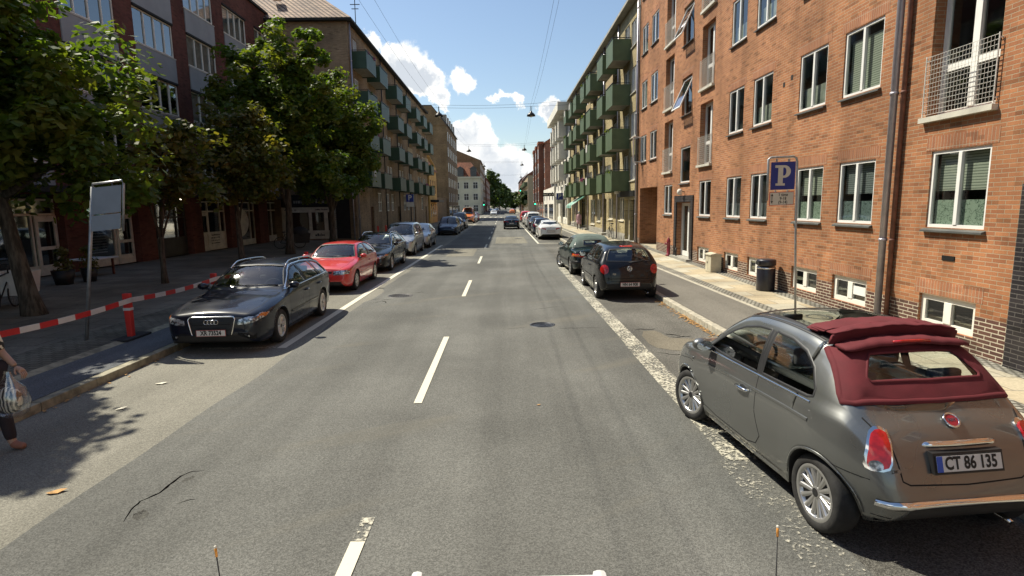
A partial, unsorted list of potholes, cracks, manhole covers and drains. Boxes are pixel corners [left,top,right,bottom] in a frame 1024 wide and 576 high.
crack [123,471,196,522]
